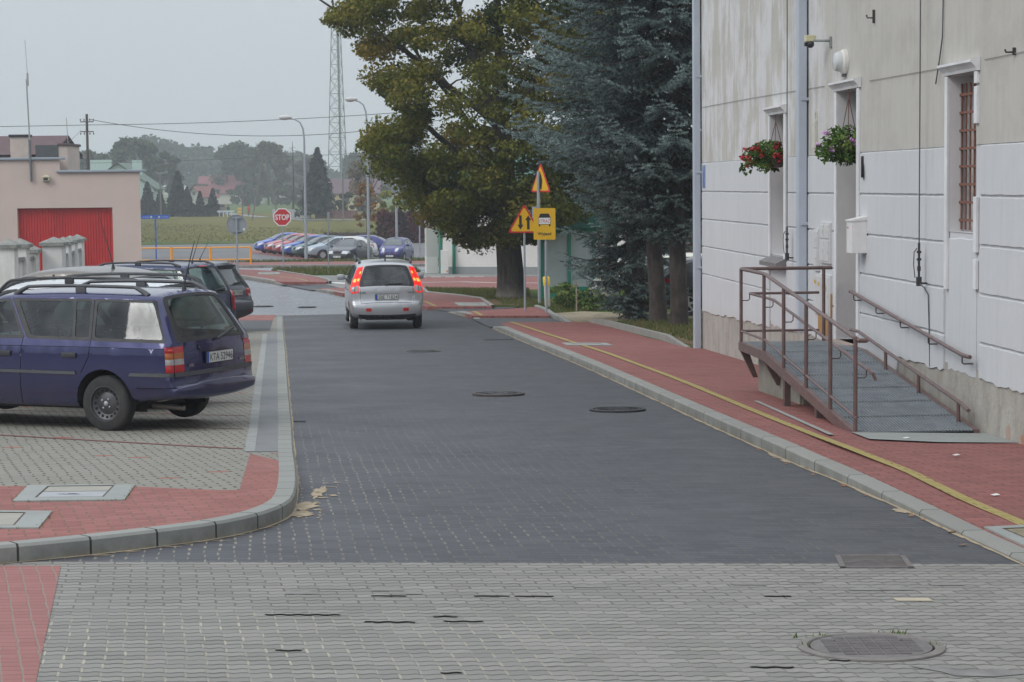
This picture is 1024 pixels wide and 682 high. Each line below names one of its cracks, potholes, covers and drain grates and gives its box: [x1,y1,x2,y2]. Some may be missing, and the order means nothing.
manhole cover [793,628,947,662]
drain grate [834,554,914,568]
utility cover [0,510,52,529]
utility cover [11,484,136,502]
